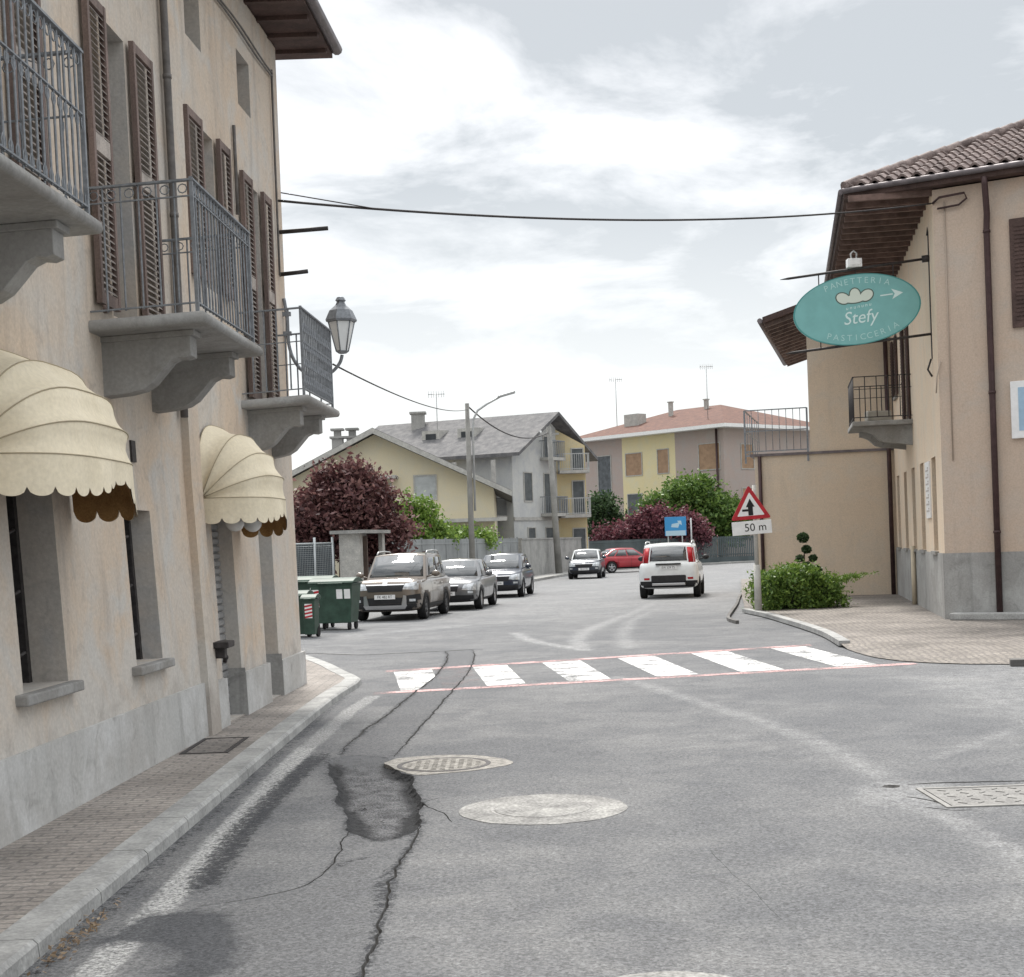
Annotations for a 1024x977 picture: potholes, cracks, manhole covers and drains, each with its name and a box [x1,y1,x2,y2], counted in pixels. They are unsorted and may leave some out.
crack [202,798,452,977]
manhole cover [459,794,628,825]
manhole cover [384,755,513,775]
manhole cover [179,737,249,755]
